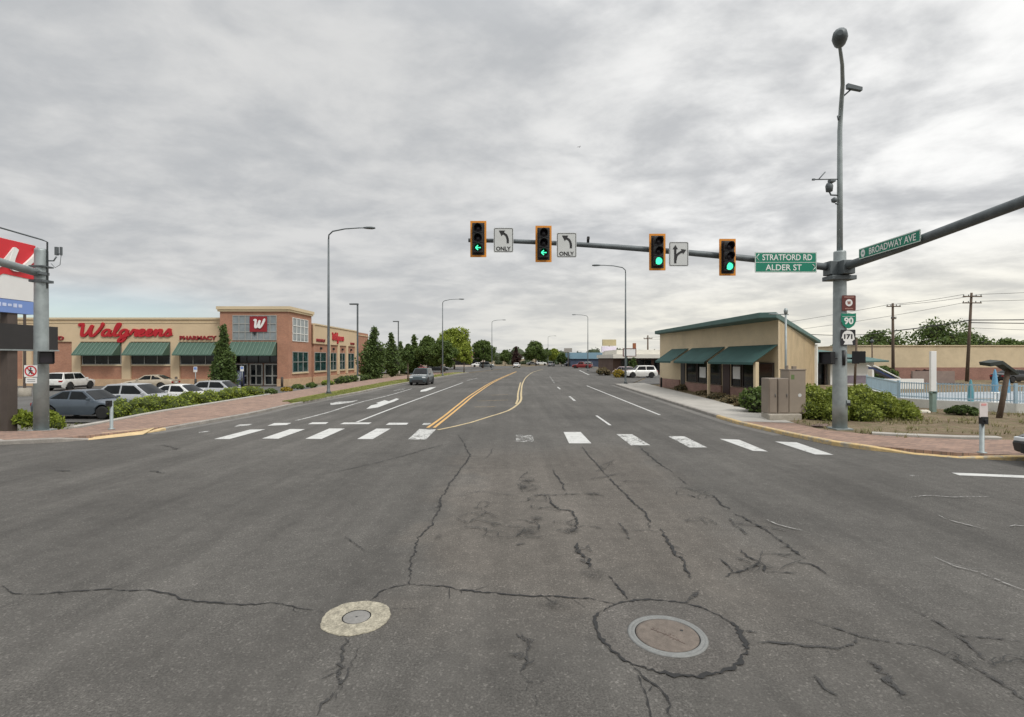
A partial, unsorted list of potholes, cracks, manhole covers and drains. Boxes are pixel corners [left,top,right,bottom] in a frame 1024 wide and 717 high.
manhole cover [627,615,709,658]
manhole cover [320,601,391,636]
crack [3,585,322,612]
crack [371,435,1024,717]
